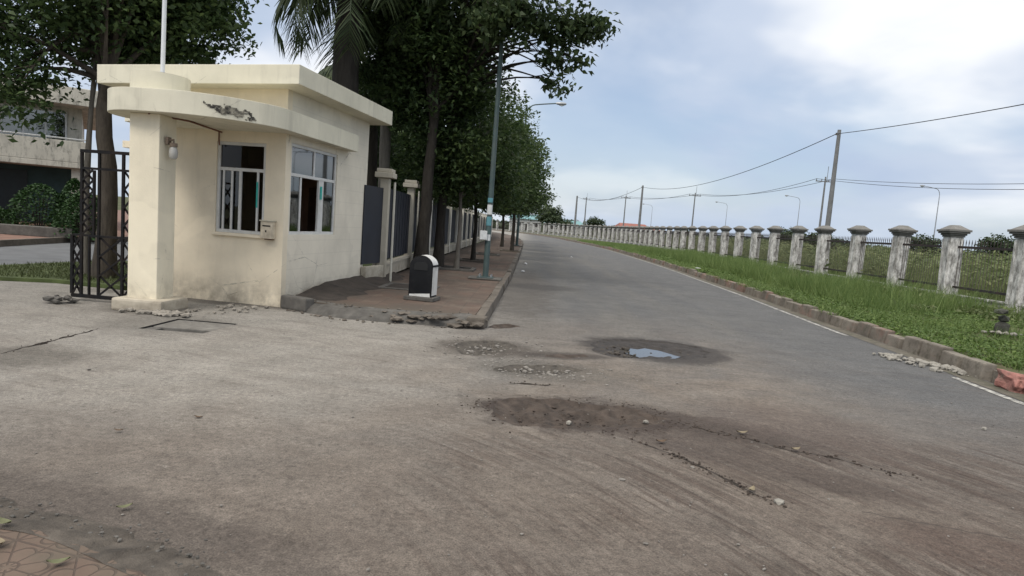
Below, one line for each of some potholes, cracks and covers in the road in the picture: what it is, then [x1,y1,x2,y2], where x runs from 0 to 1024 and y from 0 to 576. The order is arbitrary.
pothole [491,397,671,430]
pothole [459,355,635,386]
manhole cover [140,319,236,333]
pothole [423,329,543,370]
pothole [590,339,711,360]
crack [628,423,921,508]
